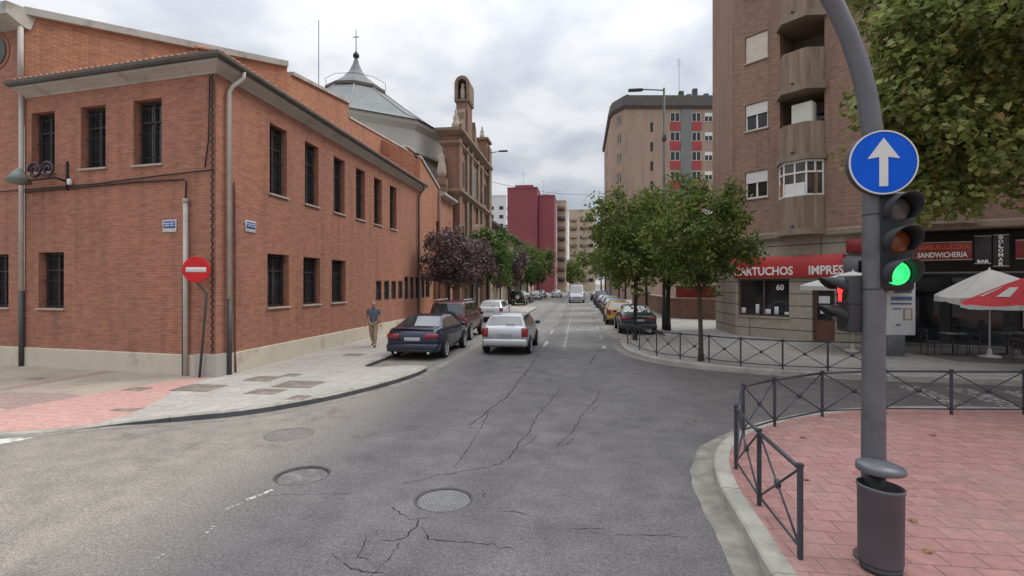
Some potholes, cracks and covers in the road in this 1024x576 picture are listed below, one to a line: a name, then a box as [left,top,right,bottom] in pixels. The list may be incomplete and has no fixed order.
crack [557,392,600,446]
manhole cover [263,428,315,442]
crack [402,355,559,516]
manhole cover [273,466,331,486]
crack [332,506,509,576]
crack [573,528,685,540]
manhole cover [414,488,473,512]
